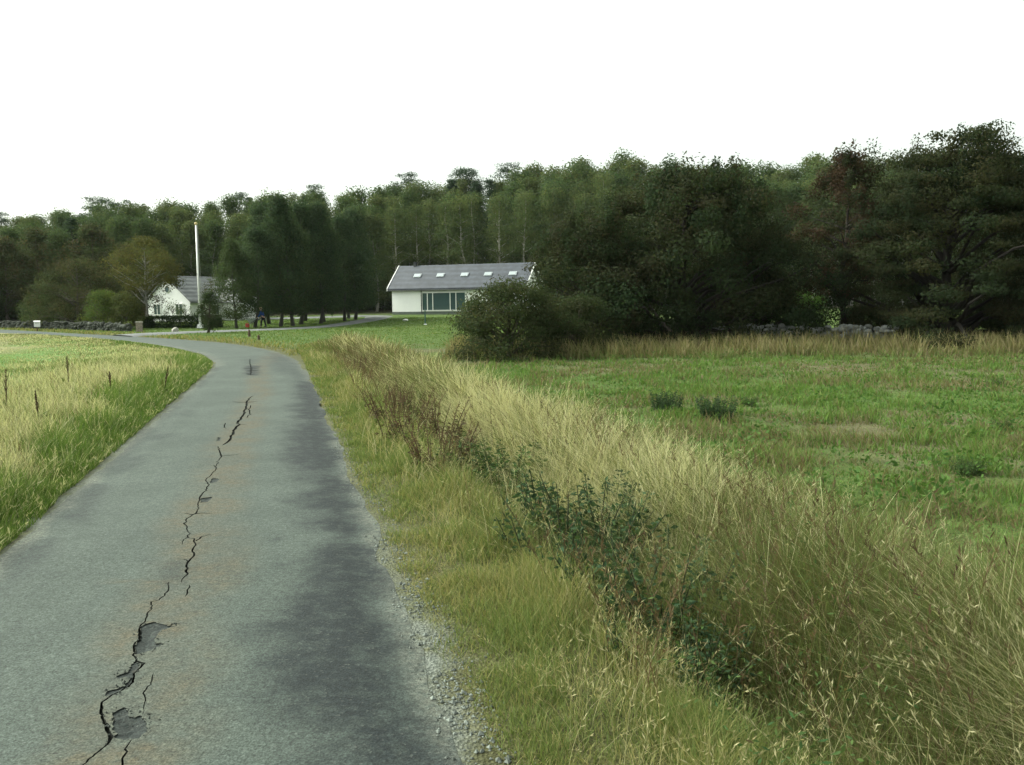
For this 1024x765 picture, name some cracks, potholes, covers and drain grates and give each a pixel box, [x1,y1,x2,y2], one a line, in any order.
pothole [112,707,148,740]
crack [83,396,252,765]
pothole [135,622,173,654]
